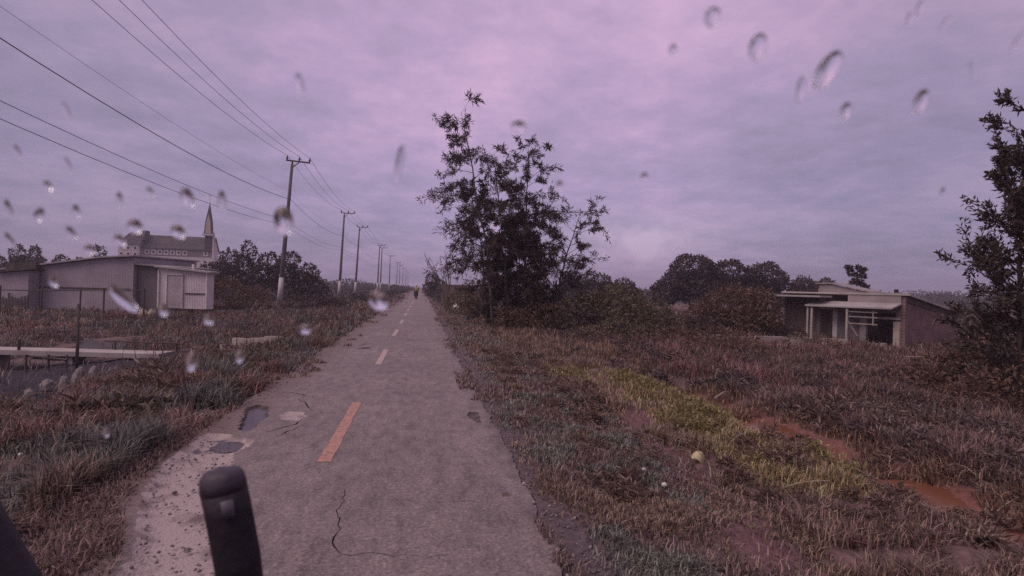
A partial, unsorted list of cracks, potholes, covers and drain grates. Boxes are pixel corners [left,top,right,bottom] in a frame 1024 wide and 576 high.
crack [266,392,316,437]
crack [332,491,440,559]
pothole [237,405,270,431]
pothole [467,412,482,423]
